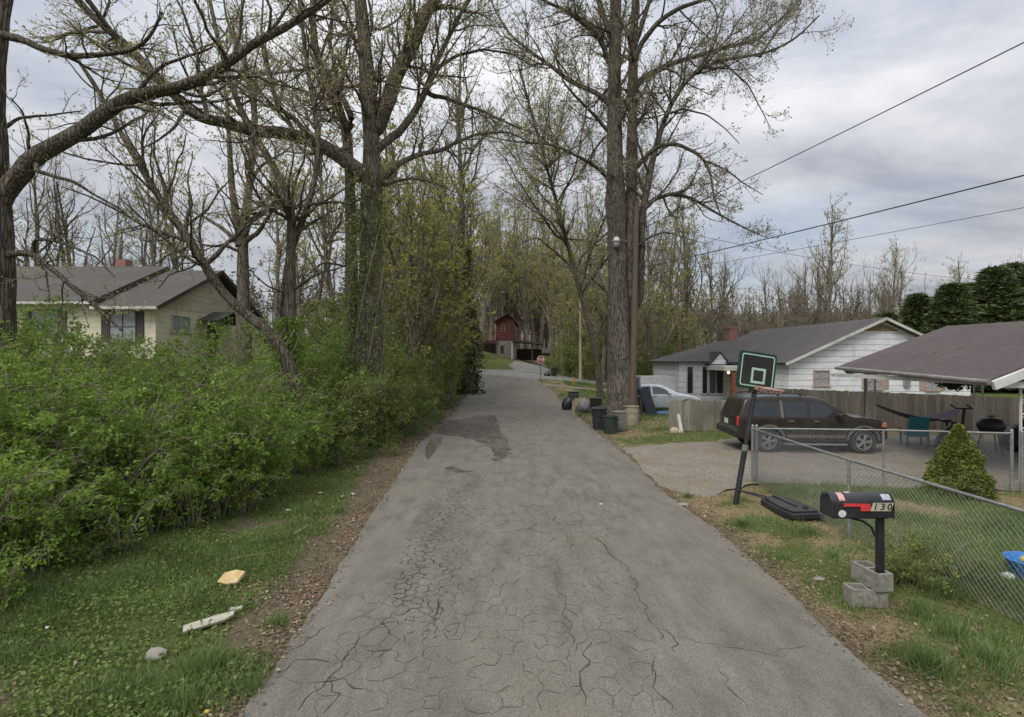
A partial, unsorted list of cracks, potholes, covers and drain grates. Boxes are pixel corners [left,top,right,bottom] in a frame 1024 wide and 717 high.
crack [242,389,819,717]
